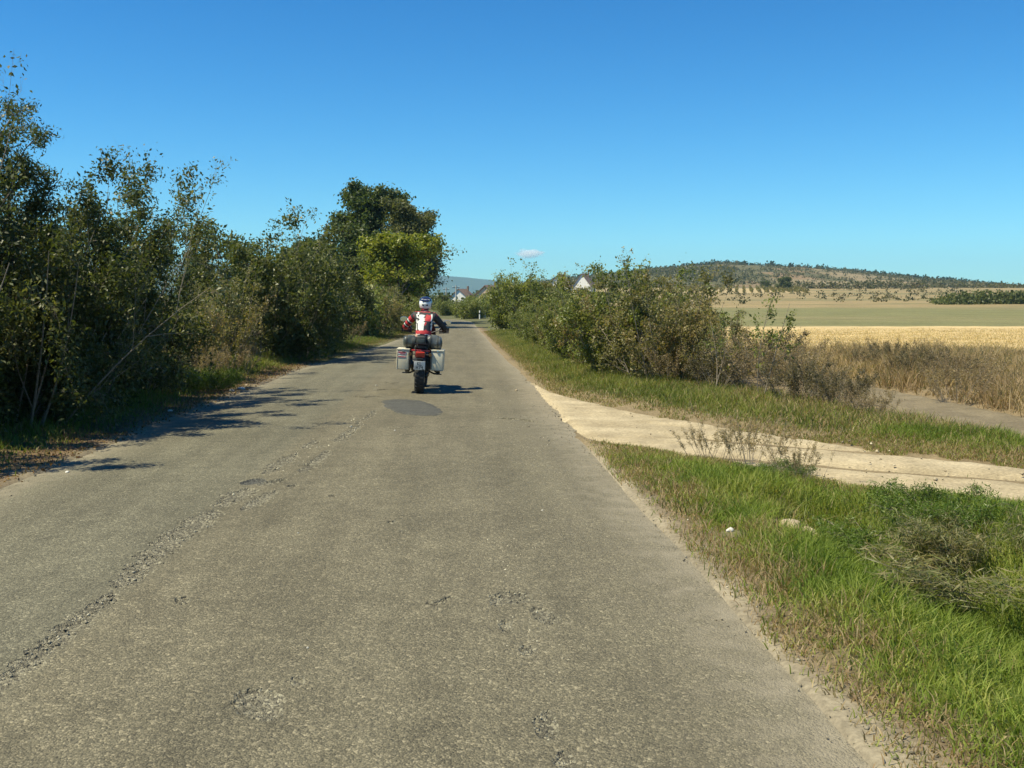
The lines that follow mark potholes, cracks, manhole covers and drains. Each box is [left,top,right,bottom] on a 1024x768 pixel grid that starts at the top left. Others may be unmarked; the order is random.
pothole [488,590,533,607]
pothole [532,710,559,739]
pothole [230,688,287,722]
pothole [529,606,561,625]
pothole [498,619,513,633]
